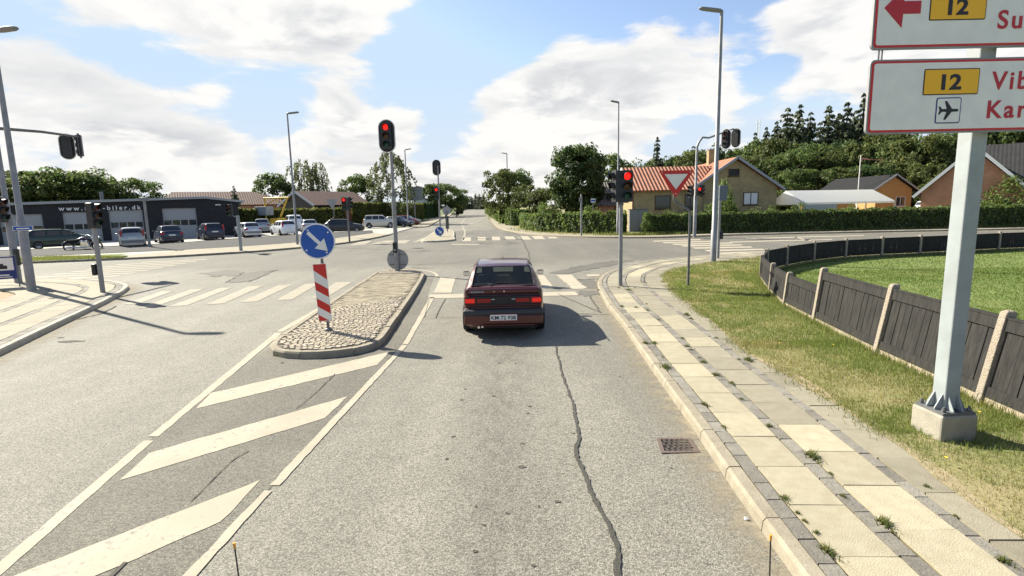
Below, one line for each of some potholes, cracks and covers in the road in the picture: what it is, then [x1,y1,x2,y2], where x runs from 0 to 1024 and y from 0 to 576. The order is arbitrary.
crack [190,451,248,501]
drain grate [657,438,700,454]
